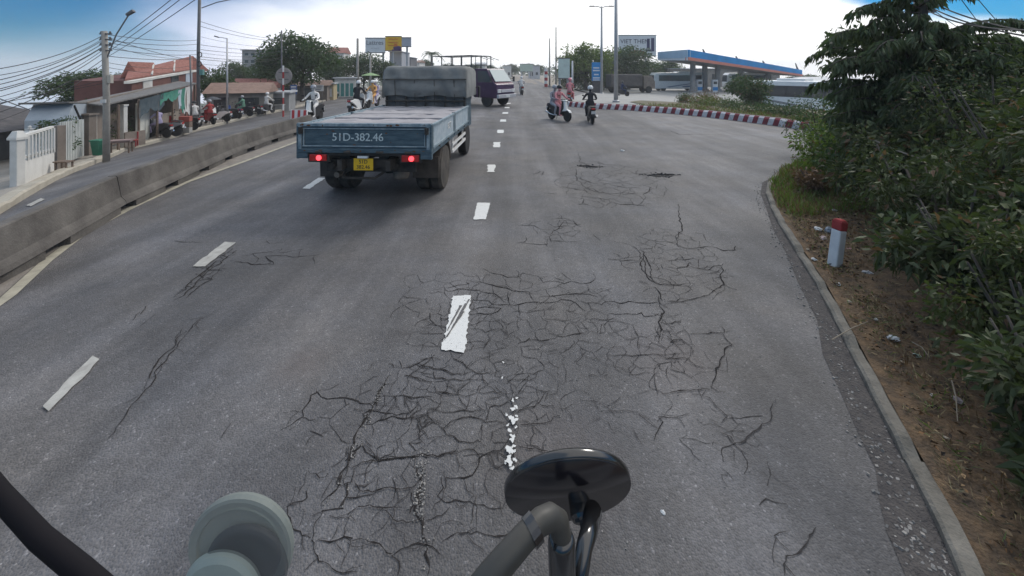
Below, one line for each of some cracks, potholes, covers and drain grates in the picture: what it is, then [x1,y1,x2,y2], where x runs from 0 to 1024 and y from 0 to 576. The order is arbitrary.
crack [281,269,658,575]
crack [518,155,792,505]
crack [114,317,204,432]
